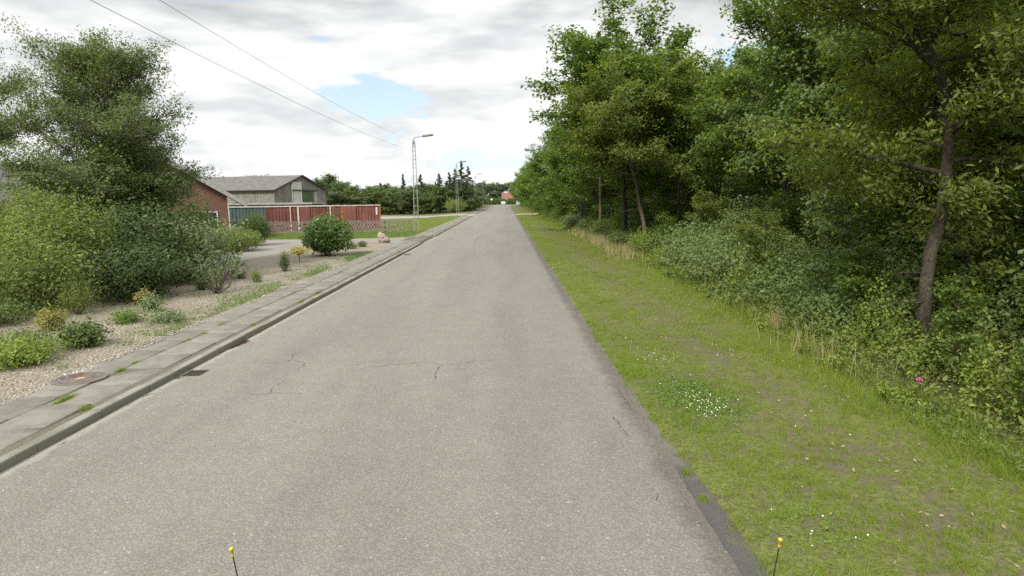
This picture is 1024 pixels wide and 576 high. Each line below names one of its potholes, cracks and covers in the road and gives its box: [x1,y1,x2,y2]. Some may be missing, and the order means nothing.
manhole cover [49,371,108,386]
